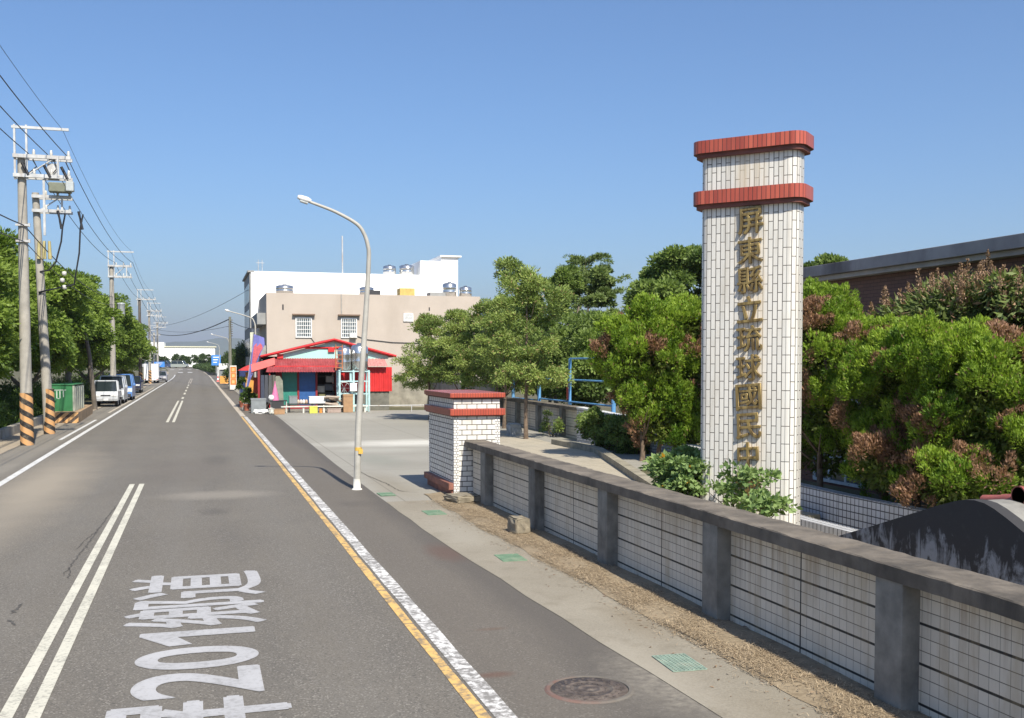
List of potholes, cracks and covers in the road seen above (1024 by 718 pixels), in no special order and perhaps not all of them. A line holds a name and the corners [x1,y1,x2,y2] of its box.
drain grate [652,653,707,672]
crack [63,505,116,578]
manhole cover [544,675,634,704]
drain grate [494,554,528,562]
